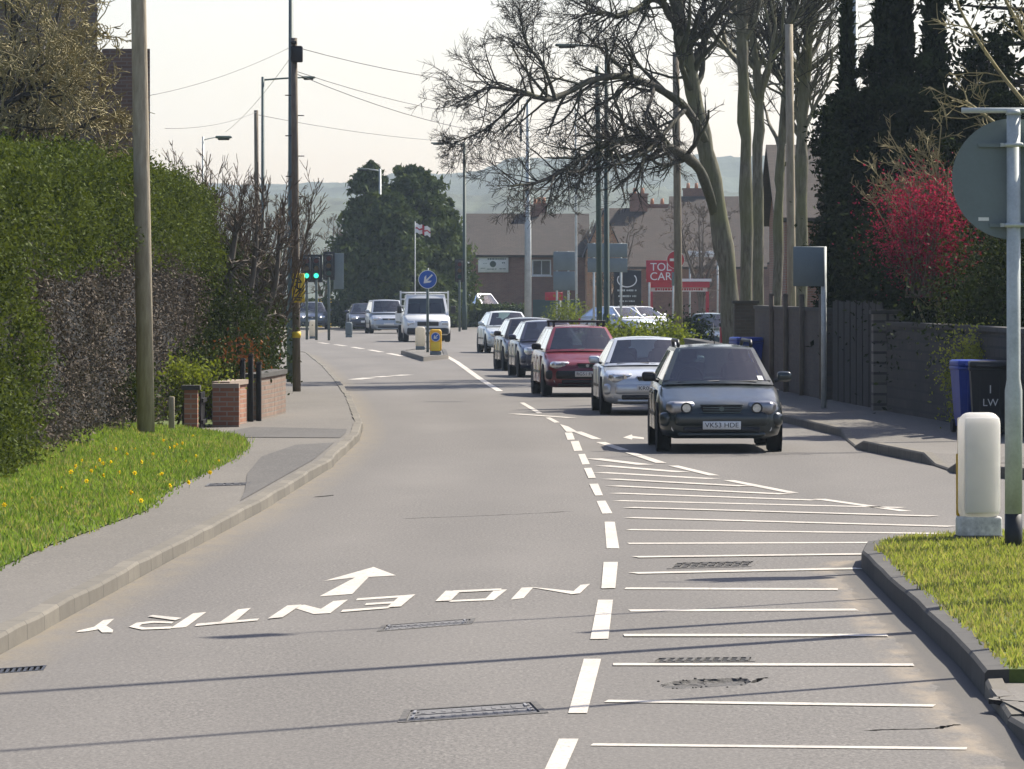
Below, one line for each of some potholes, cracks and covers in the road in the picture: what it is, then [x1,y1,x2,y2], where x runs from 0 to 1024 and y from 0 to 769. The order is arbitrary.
crack [989,696,1024,705]
pothole [657,677,750,689]
drain grate [0,665,47,674]
